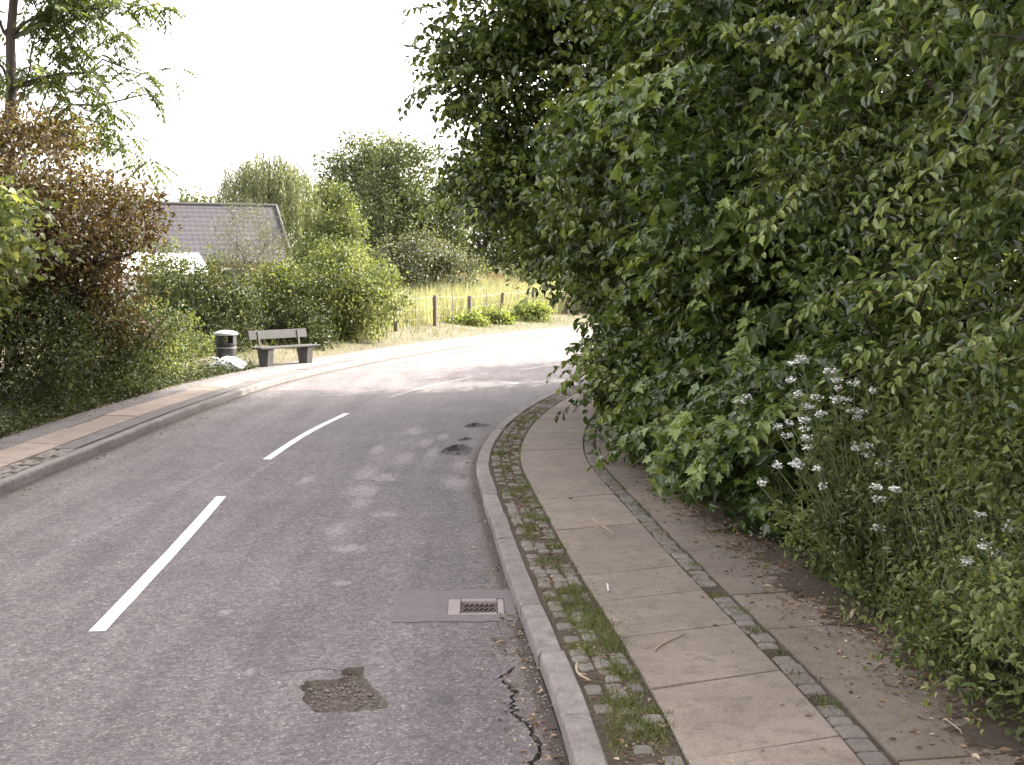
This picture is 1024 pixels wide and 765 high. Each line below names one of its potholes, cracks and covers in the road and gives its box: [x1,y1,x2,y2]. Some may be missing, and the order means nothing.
pothole [299,666,389,713]
crack [494,667,549,765]
pothole [440,444,473,455]
drain grate [447,599,505,615]
